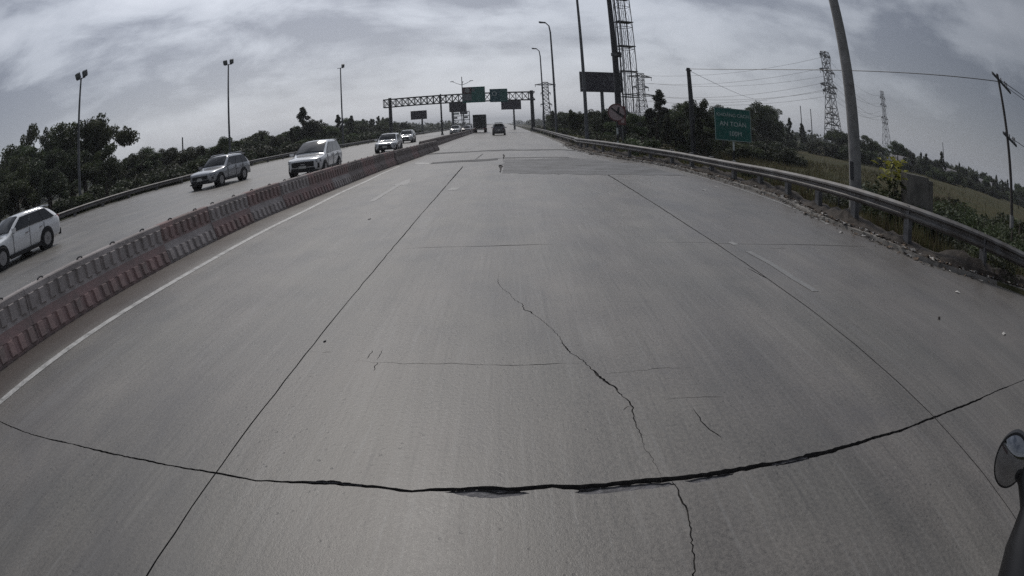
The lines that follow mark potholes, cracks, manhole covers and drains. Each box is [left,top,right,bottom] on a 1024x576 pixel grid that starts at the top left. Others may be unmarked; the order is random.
crack [0,280,1023,576]
